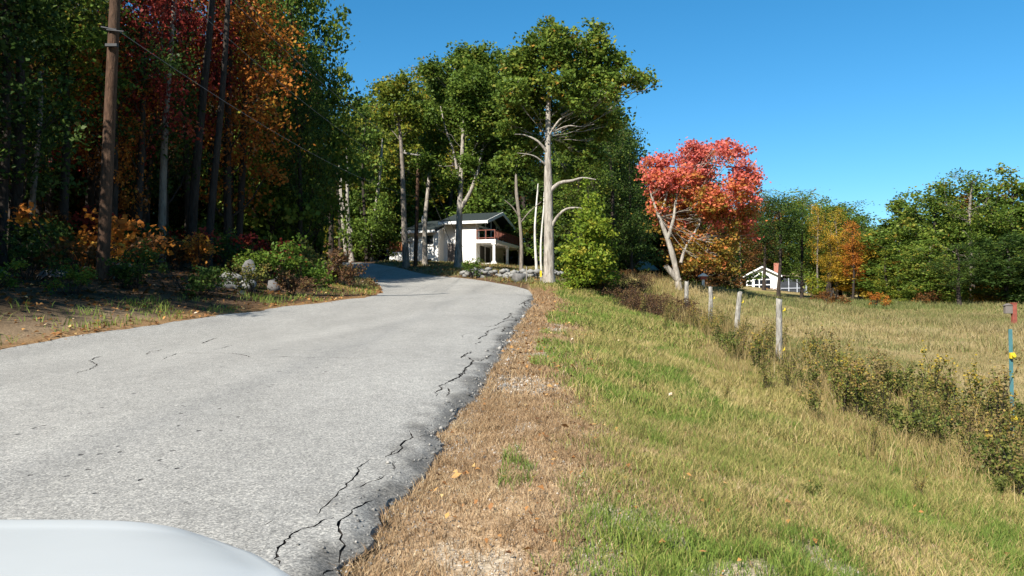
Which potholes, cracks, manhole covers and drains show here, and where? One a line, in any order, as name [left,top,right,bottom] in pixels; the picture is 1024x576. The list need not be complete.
crack [267,431,424,576]
crack [435,299,530,397]
